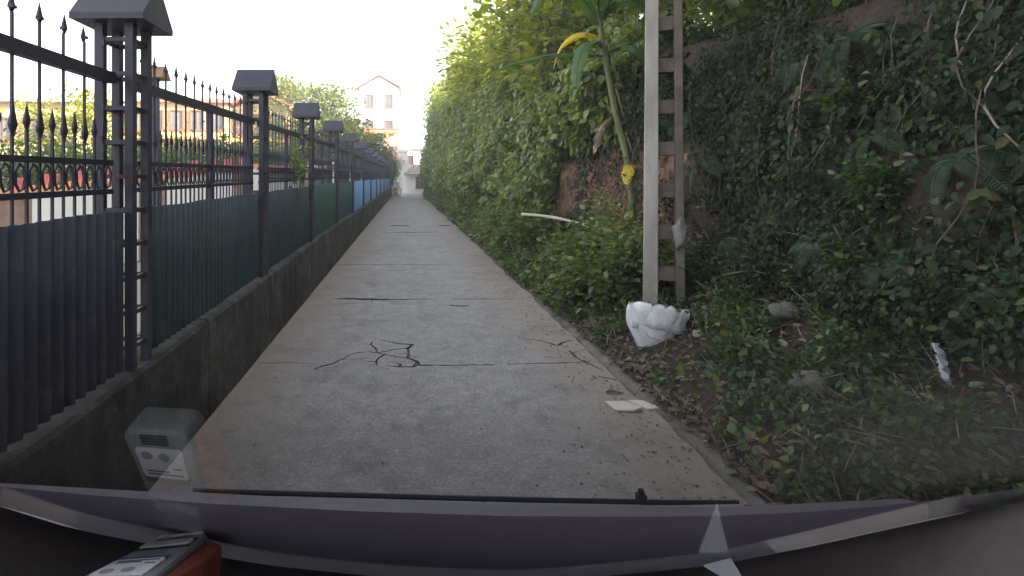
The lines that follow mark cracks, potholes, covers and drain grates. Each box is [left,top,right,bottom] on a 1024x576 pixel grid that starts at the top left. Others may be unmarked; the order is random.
crack [315,340,489,369]
crack [528,339,616,380]
